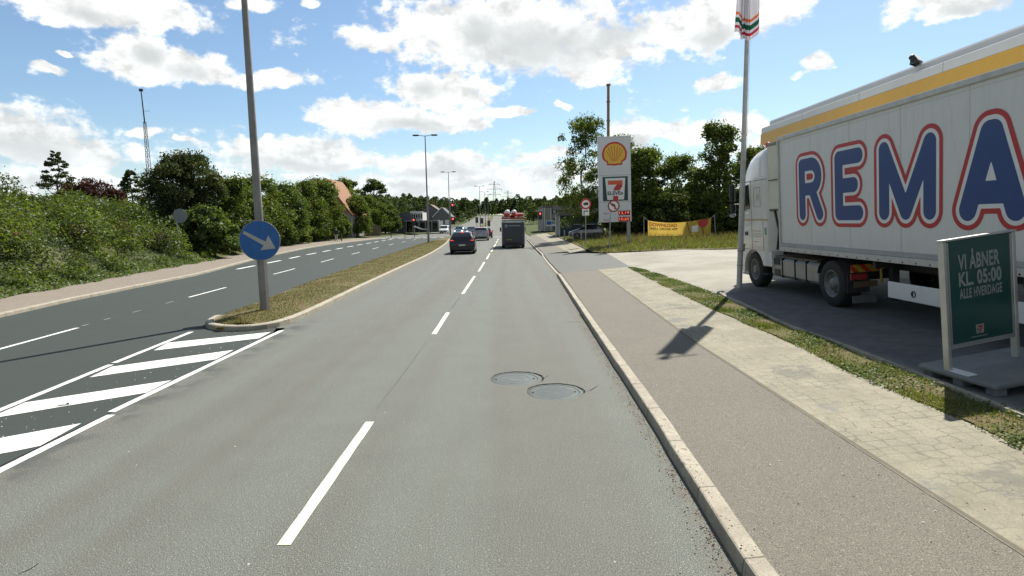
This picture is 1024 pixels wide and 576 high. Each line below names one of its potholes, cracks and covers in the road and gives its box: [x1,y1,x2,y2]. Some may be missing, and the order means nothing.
manhole cover [527,384,583,400]
manhole cover [491,372,542,386]
